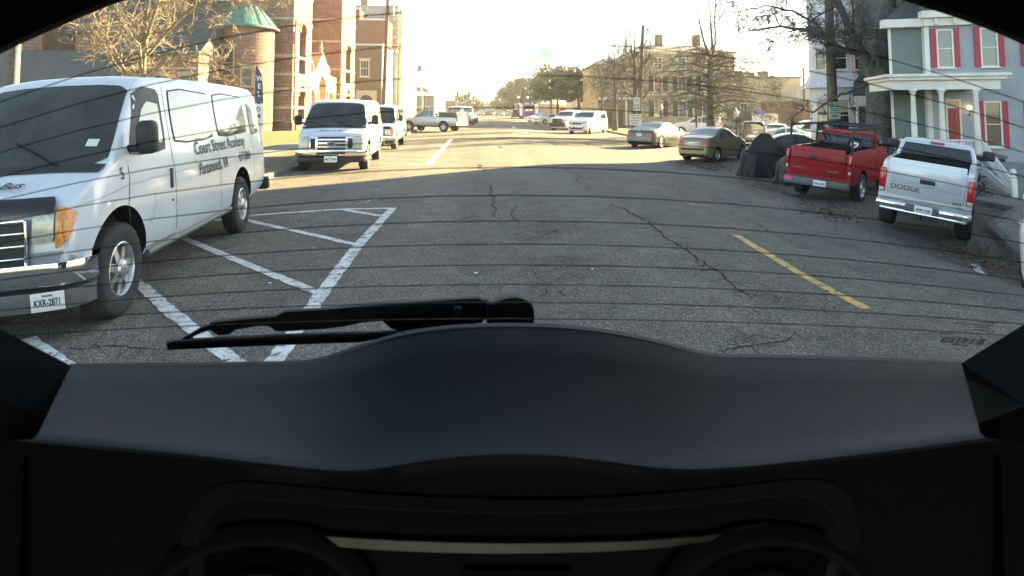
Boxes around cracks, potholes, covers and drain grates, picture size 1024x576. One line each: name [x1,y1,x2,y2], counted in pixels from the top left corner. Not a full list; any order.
crack [610,203,802,354]
crack [460,145,590,296]
crack [68,341,162,360]
